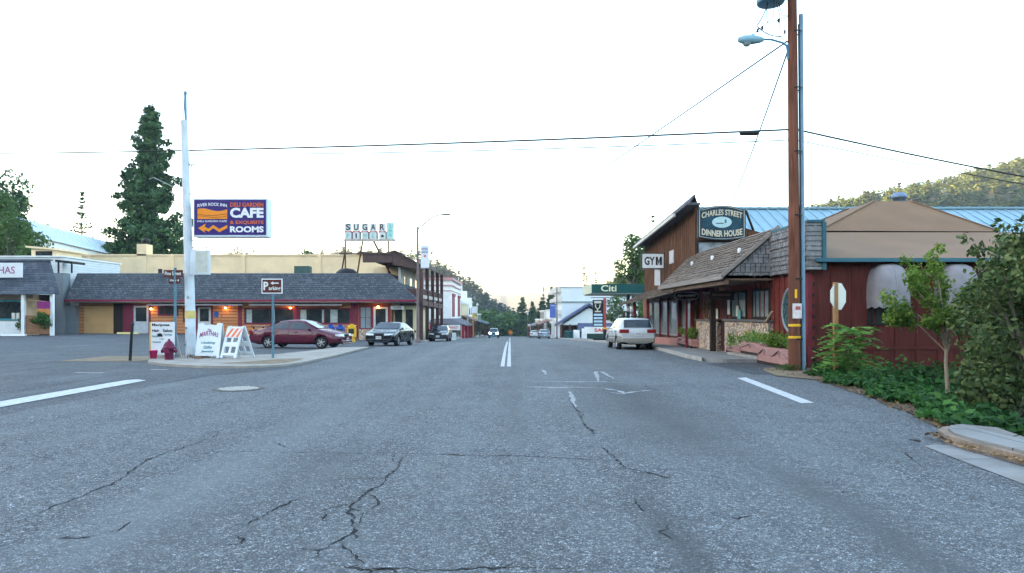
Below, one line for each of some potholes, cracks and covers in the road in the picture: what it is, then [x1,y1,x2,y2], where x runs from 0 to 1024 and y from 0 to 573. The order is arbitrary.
crack [4,428,243,528]
crack [569,398,673,478]
crack [285,454,410,563]
crack [224,495,305,546]
